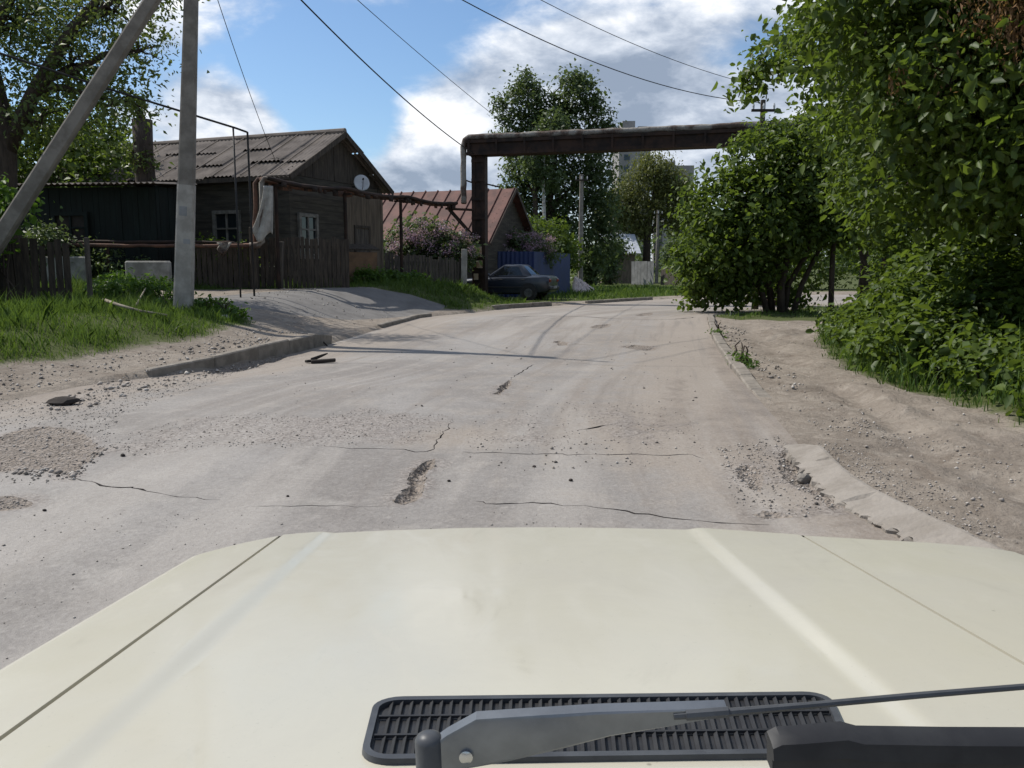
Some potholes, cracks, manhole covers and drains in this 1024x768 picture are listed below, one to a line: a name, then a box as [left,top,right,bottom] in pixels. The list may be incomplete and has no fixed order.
crack [75,477,205,500]
crack [328,423,450,452]
pothole [0,426,107,476]
pothole [777,449,840,511]
crack [479,501,762,525]
pothole [0,496,33,511]
pothole [753,511,792,519]
pothole [392,459,436,505]
pothole [734,464,764,493]
